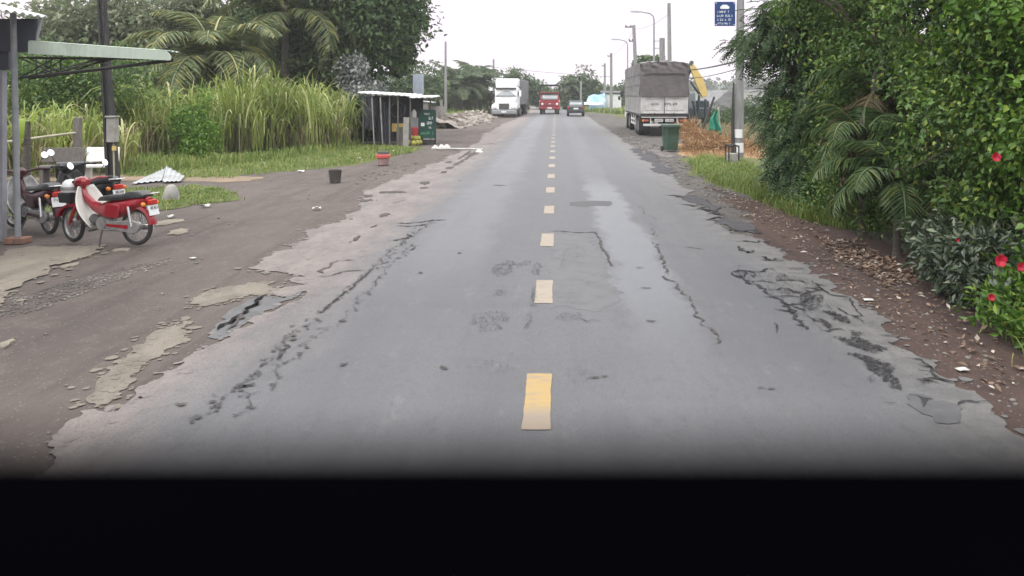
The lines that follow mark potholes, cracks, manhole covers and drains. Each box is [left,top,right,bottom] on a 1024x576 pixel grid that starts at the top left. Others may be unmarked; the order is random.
pothole [208,292,301,339]
crack [639,206,721,343]
crack [673,195,957,407]
crack [566,231,613,266]
crack [190,219,446,422]
